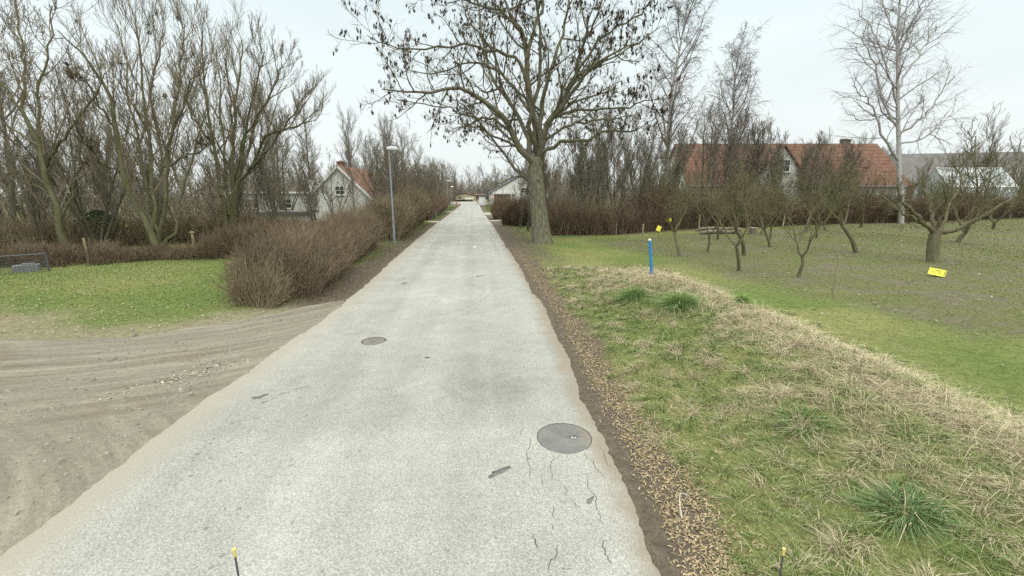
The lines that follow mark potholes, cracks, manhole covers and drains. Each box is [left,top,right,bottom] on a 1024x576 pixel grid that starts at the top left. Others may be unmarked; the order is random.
pothole [488,466,511,479]
manhole cover [361,337,387,345]
crack [520,427,612,573]
manhole cover [537,423,592,454]
